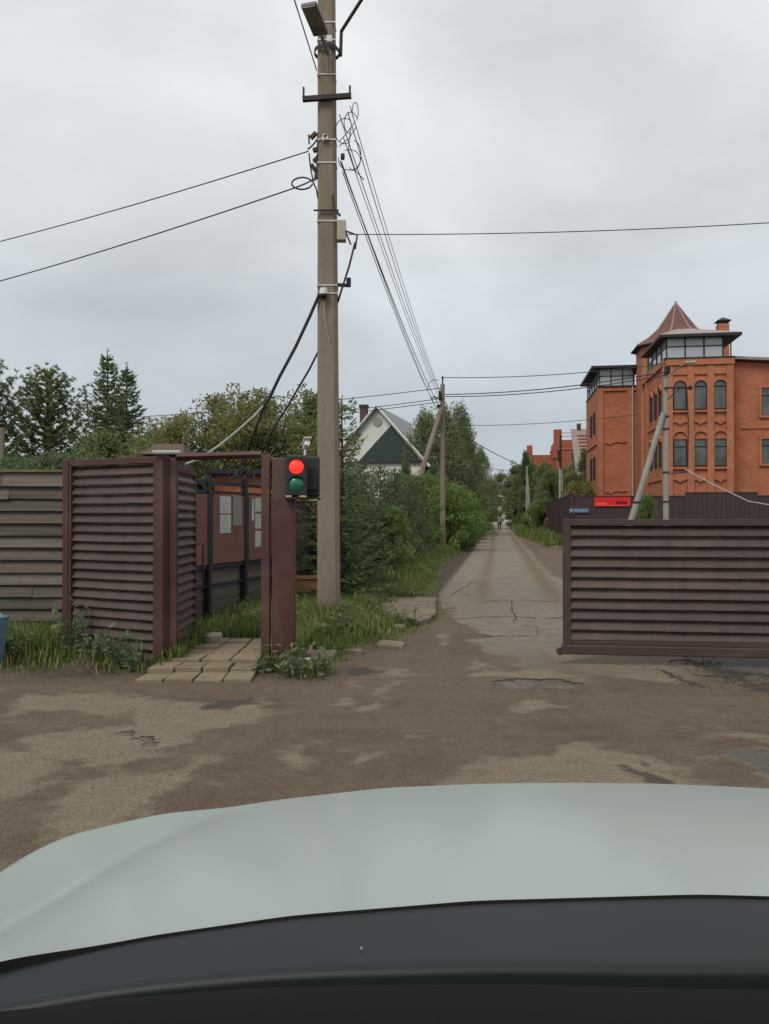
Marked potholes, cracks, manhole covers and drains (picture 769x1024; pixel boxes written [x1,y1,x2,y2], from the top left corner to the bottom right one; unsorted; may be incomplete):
crack [450,581,562,637]
crack [657,658,769,691]
pothole [493,678,585,690]
